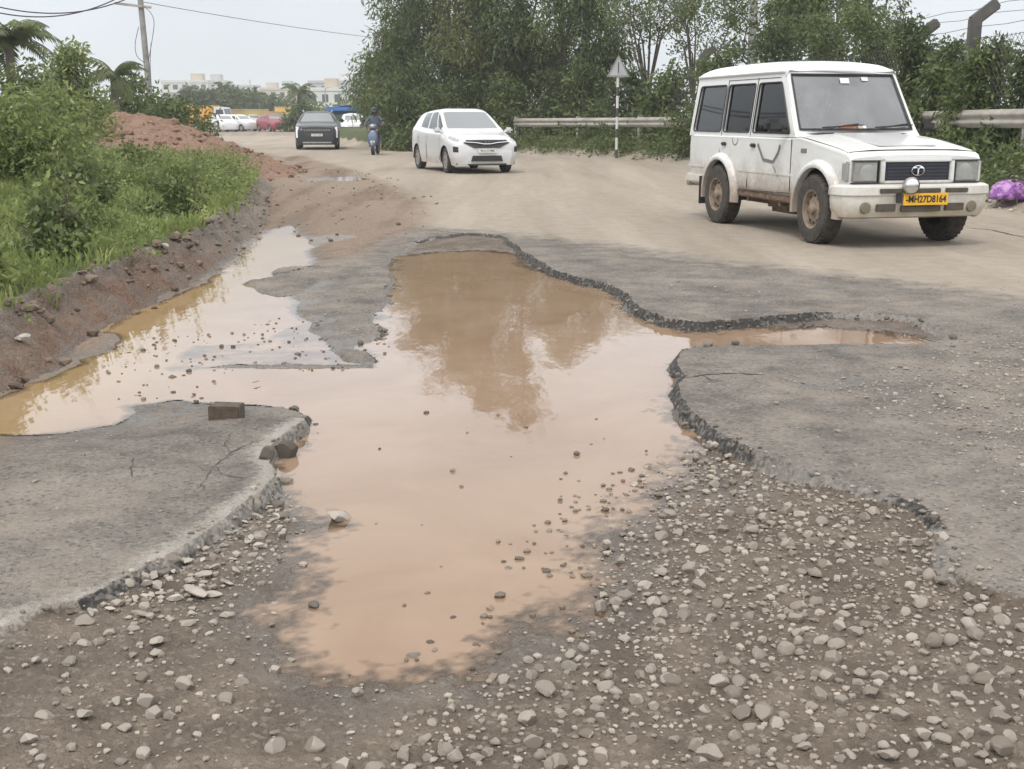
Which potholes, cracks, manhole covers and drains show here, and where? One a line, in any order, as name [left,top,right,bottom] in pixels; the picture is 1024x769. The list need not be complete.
crack [197,432,260,493]
pothole [77,233,959,742]
pothole [0,225,361,436]
